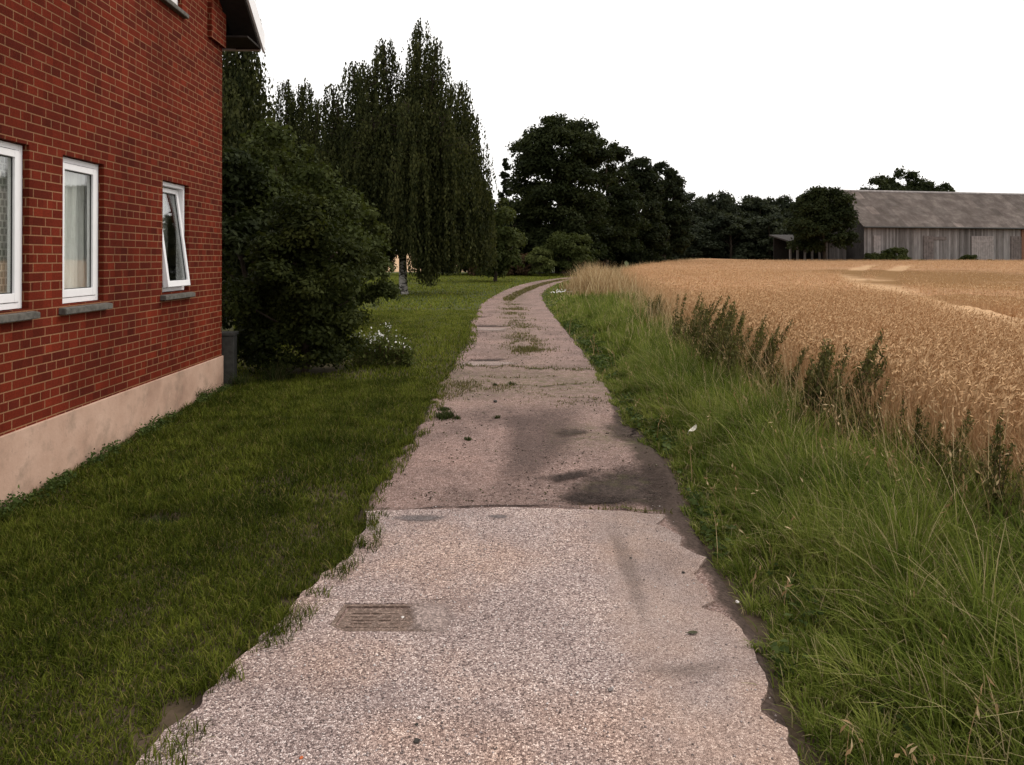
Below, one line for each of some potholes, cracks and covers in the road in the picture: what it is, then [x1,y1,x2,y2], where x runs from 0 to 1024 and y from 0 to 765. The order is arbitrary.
manhole cover [331,604,431,631]
